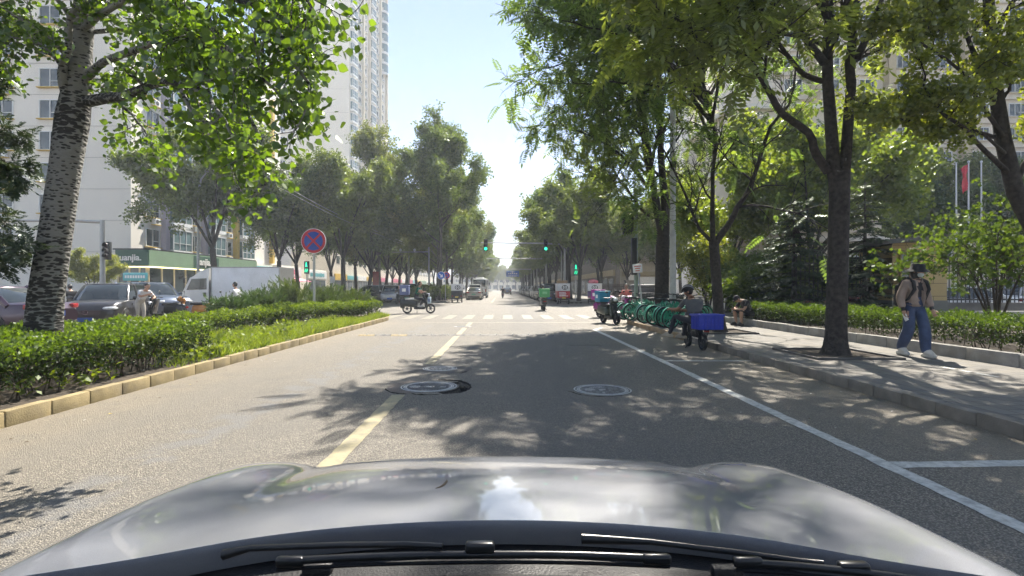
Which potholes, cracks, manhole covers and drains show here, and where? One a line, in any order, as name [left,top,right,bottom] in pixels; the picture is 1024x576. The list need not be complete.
manhole cover [400,381,457,392]
manhole cover [574,384,632,396]
pothole [438,379,472,394]
